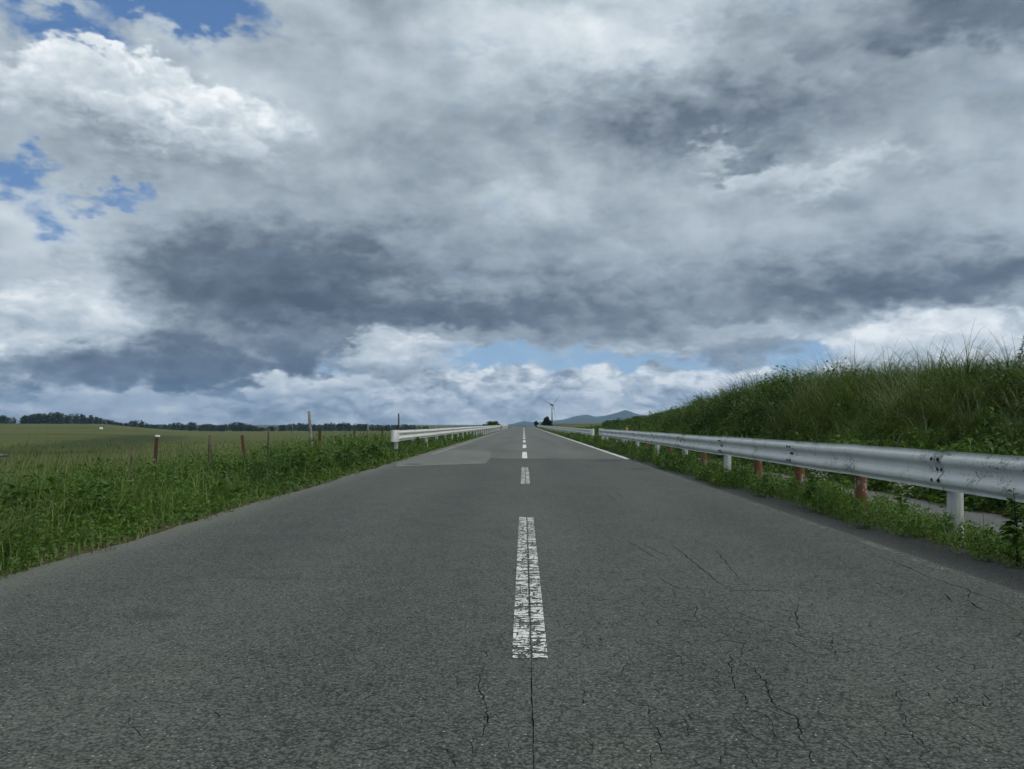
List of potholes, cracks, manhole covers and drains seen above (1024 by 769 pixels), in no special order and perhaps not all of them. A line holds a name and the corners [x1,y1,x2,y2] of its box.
crack [215,542,1024,769]
